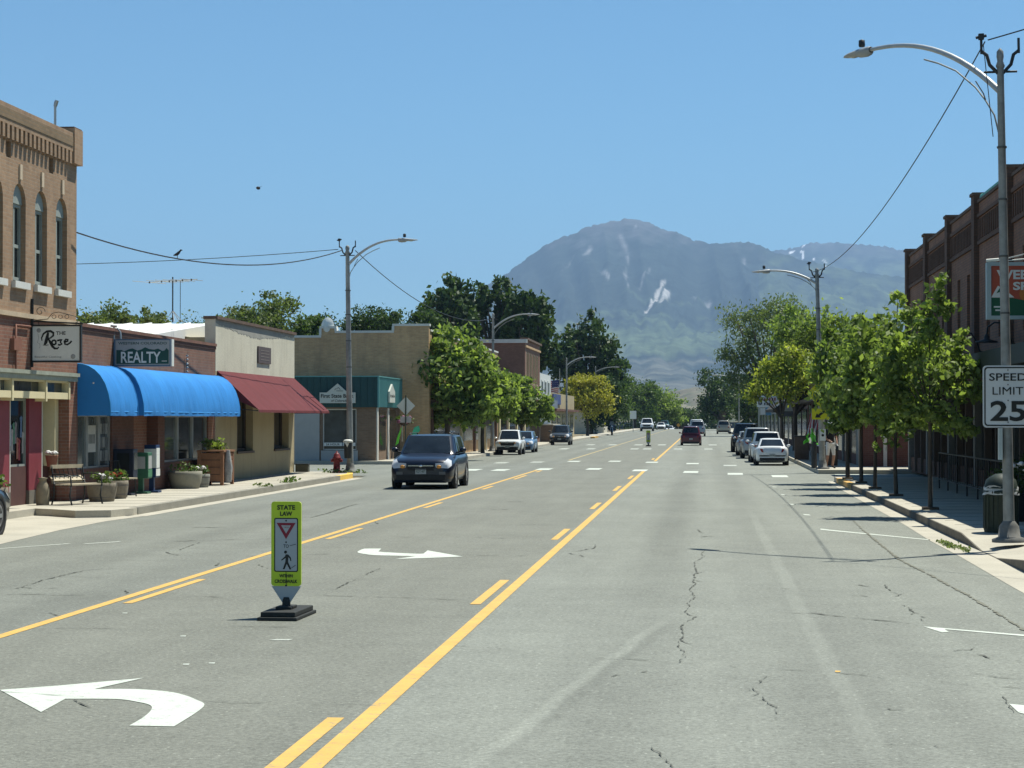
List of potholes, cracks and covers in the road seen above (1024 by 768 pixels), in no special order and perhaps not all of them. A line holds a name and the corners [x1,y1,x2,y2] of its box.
crack [789,648,1021,709]
crack [791,586,924,623]
crack [613,530,741,676]
